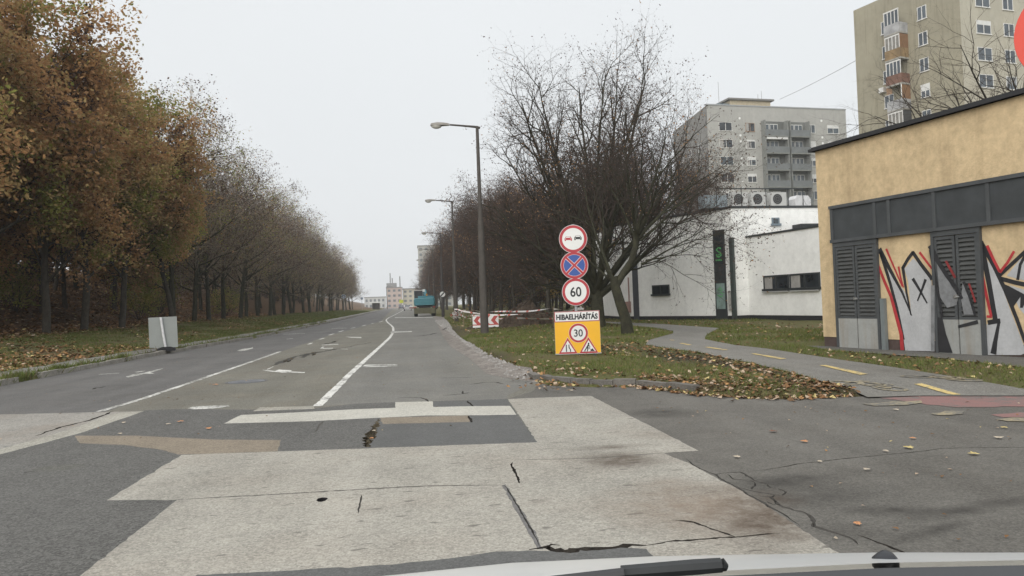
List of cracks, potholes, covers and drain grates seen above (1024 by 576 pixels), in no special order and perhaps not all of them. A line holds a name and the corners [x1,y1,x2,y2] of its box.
crack [529,447,1023,553]
pothole [362,419,381,447]
crack [36,411,113,436]
